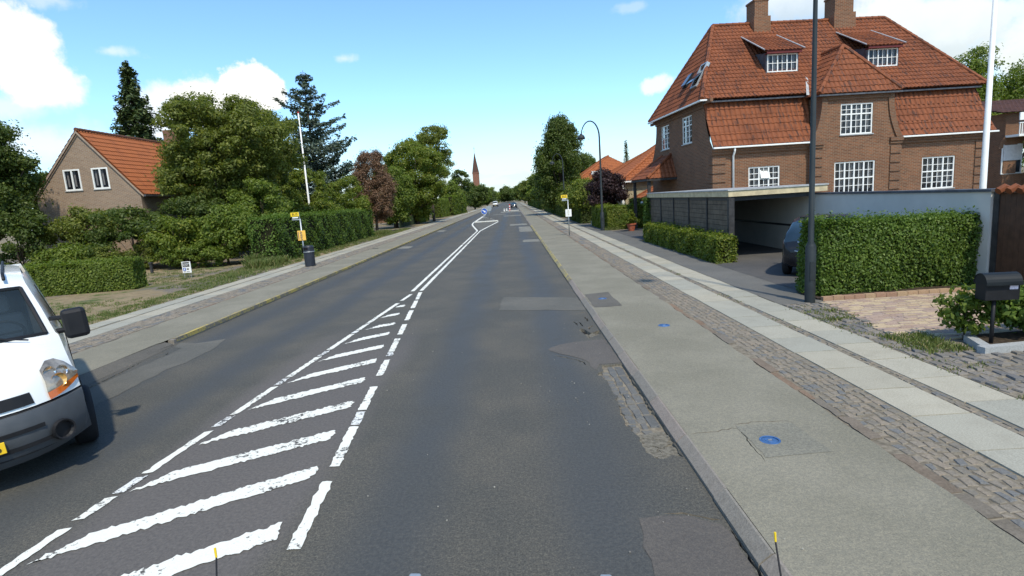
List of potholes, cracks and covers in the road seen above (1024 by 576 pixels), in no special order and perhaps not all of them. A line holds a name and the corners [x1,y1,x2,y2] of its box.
manhole cover [759,436,781,444]
pothole [597,364,683,459]
